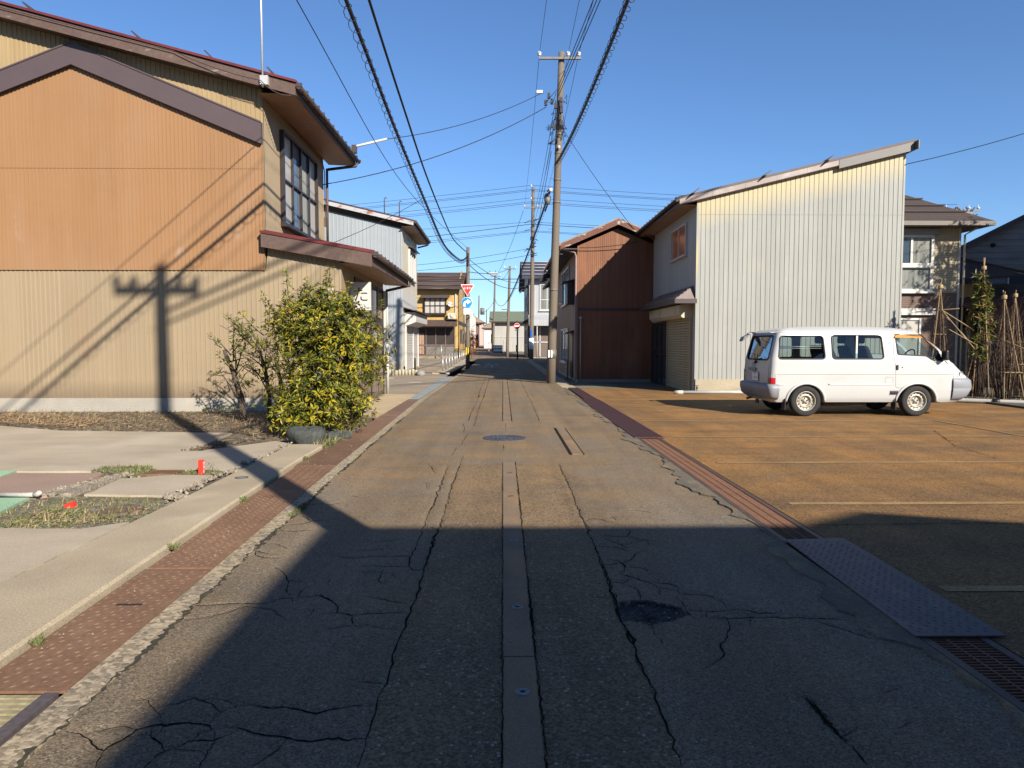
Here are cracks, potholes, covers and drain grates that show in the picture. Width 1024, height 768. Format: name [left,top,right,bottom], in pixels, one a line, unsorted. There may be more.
crack [585,510,868,669]
crack [803,697,867,765]
drain grate [918,637,1024,712]
crack [67,698,370,768]
pothole [617,600,689,628]
crack [181,495,435,630]
